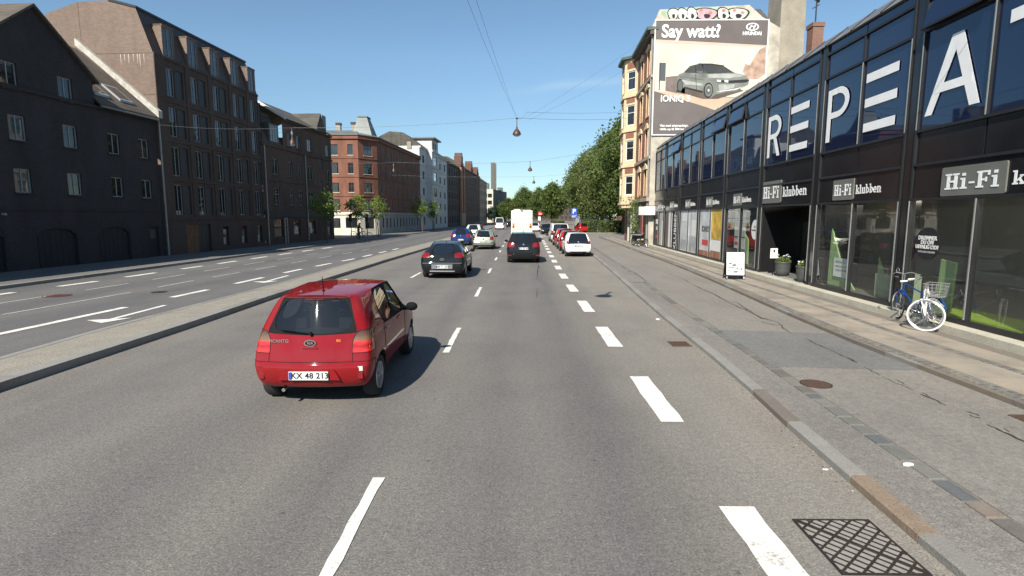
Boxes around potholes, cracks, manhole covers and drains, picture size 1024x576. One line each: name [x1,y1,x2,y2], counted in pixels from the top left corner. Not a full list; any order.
manhole cover [799,379,833,389]
